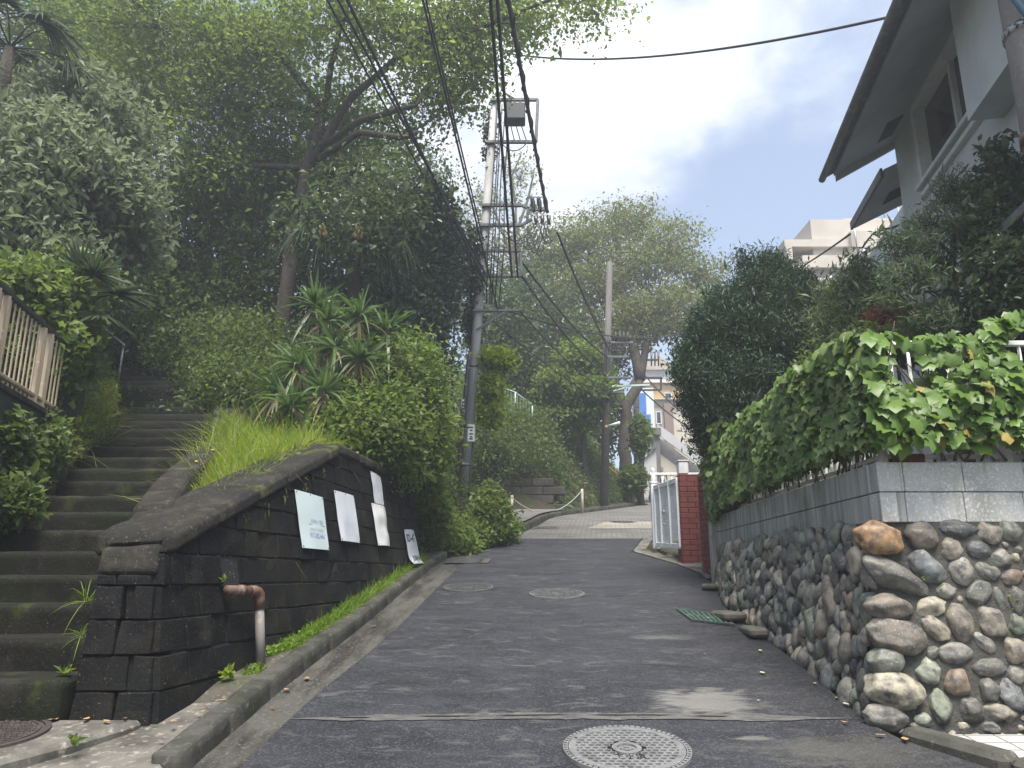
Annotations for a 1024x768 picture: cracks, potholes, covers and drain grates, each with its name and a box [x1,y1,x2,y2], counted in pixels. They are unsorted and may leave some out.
manhole cover [529,588,585,599]
manhole cover [0,720,52,749]
manhole cover [563,725,692,768]
drain grate [676,608,735,626]
manhole cover [443,583,494,593]
